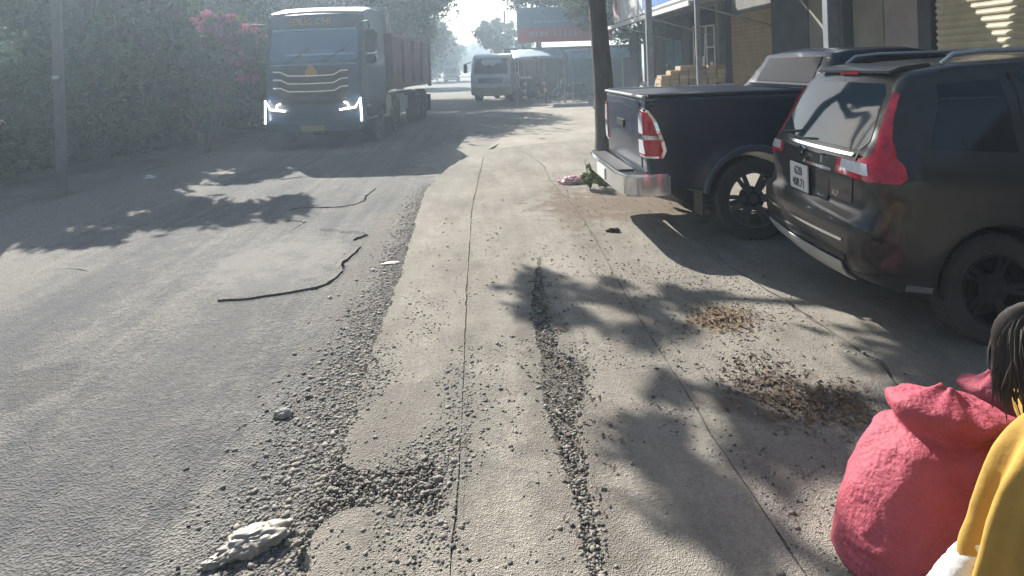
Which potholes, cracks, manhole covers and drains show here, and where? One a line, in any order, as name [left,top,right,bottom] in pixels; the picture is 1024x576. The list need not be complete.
crack [523,152,902,576]
